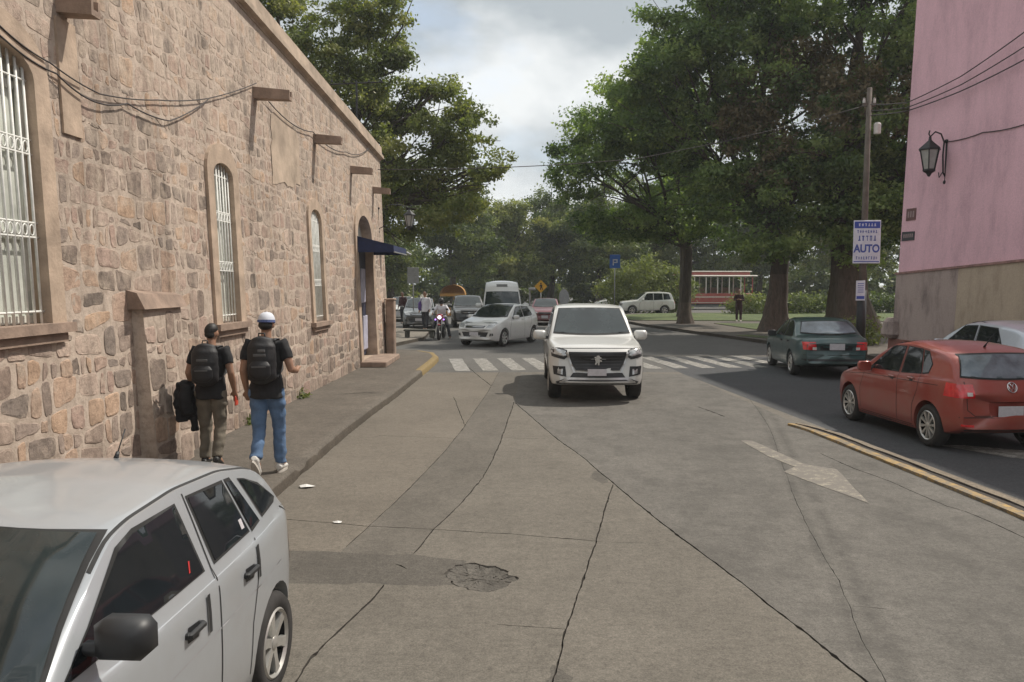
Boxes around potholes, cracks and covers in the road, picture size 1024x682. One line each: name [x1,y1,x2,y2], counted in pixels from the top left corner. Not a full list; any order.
crack [346,367,498,547]
pothole [444,563,519,592]
